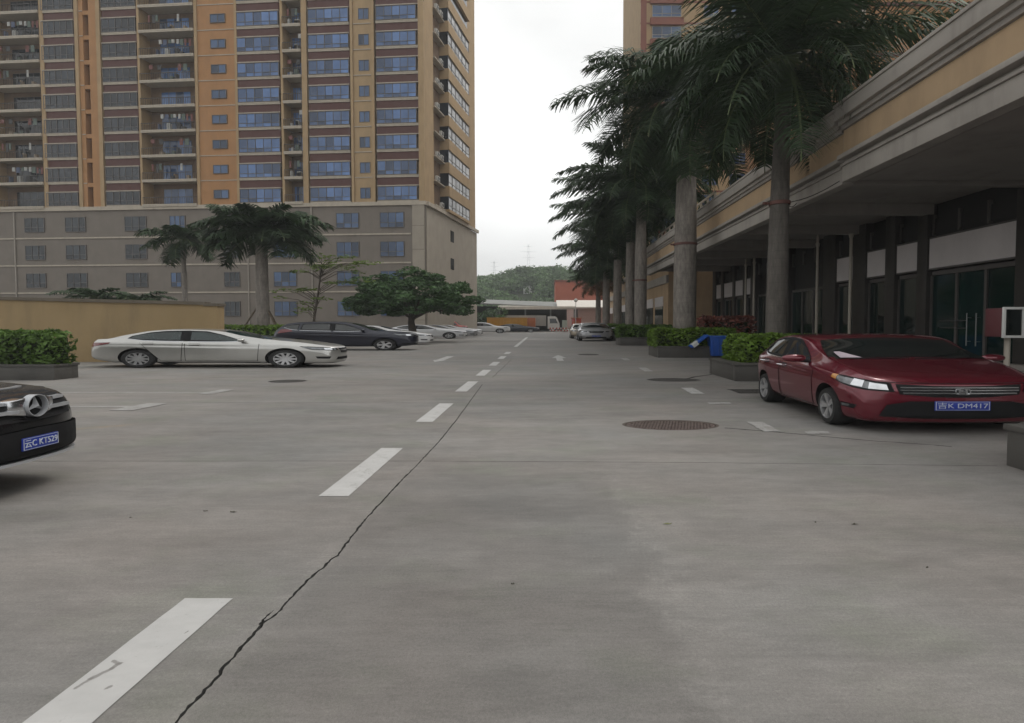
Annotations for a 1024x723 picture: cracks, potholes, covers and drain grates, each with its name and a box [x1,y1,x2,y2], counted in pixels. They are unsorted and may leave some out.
manhole cover [622,420,719,430]
crack [175,371,499,723]
